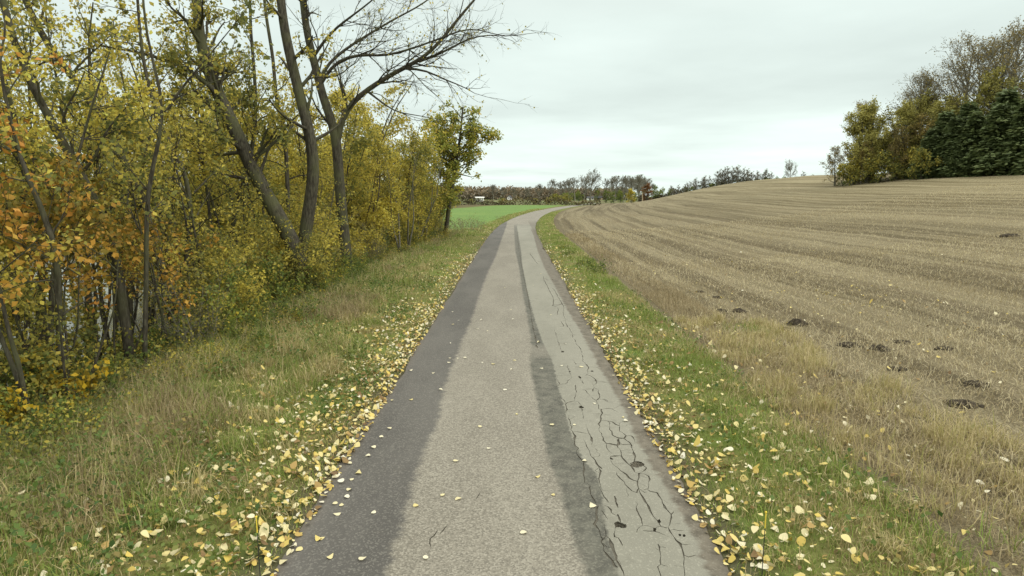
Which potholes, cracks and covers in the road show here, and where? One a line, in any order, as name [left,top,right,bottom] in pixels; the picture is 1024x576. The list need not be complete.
crack [556,313,695,576]
